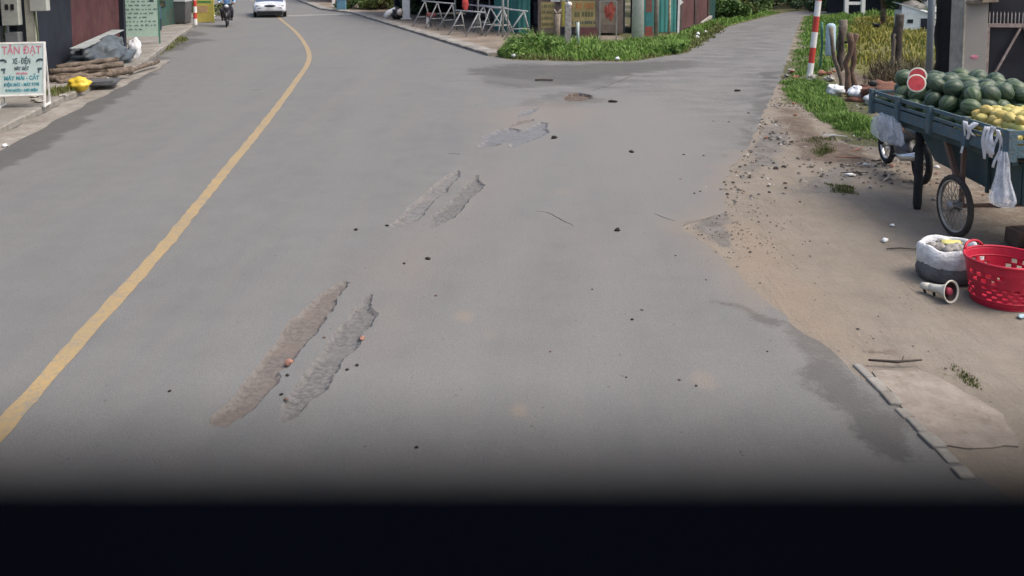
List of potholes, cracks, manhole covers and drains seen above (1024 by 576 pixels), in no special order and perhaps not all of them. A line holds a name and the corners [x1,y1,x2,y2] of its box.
pothole [390,170,460,227]
pothole [278,292,379,424]
pothole [209,280,351,428]
pothole [477,122,549,148]
pothole [563,93,593,102]
pothole [430,175,485,228]
